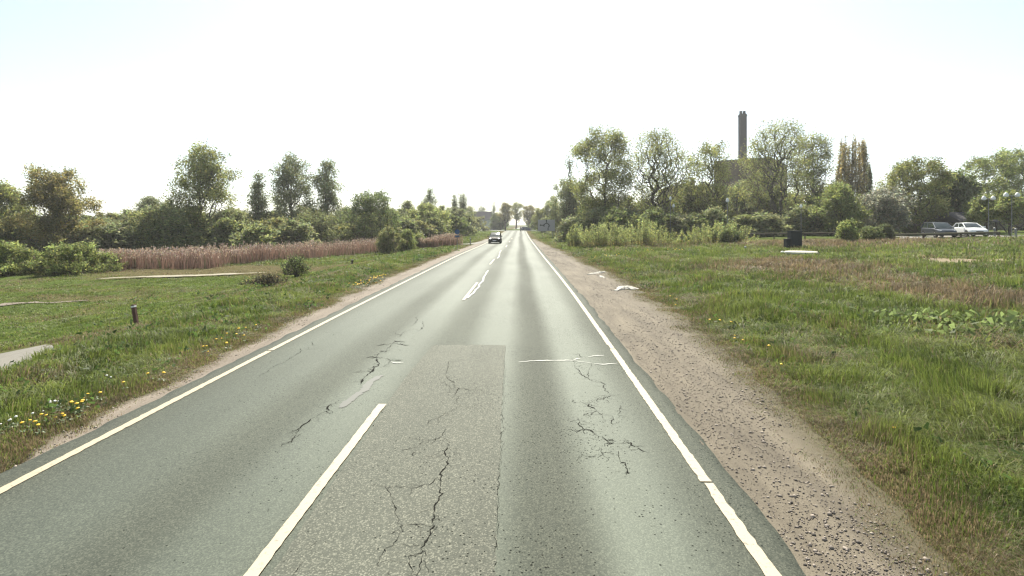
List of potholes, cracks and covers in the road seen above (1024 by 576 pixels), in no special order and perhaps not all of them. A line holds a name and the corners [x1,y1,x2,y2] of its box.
crack [377,362,484,576]
crack [571,354,643,474]
crack [351,317,423,383]
